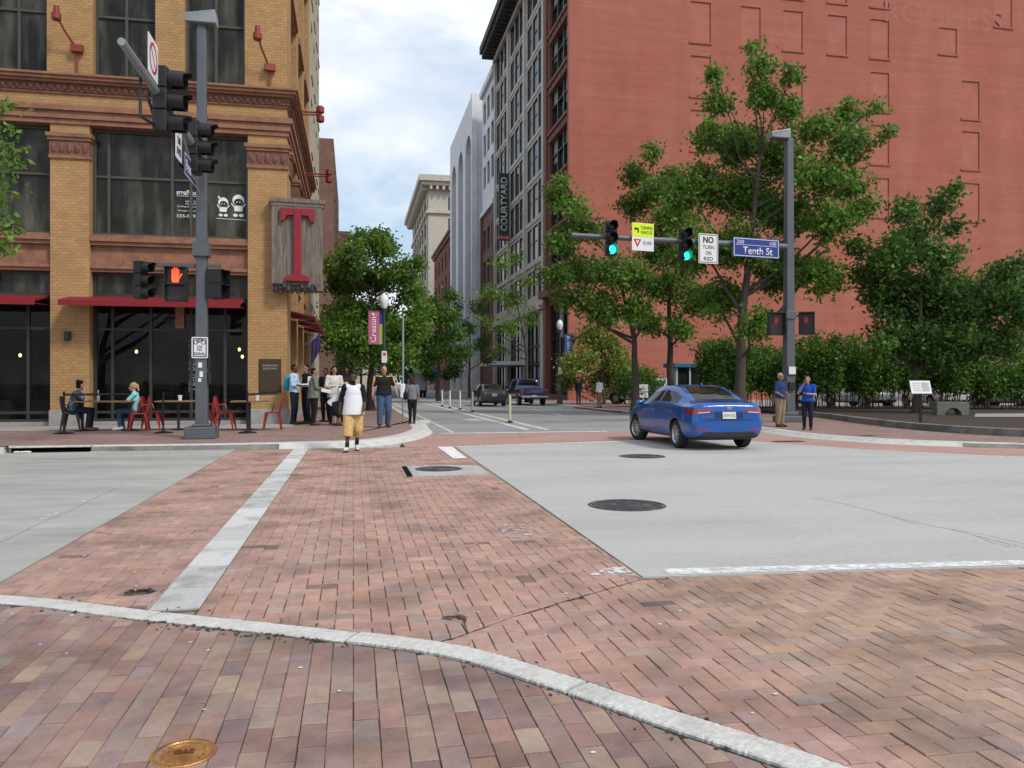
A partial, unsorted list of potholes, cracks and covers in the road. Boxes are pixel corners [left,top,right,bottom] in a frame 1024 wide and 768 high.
manhole cover [588,499,666,511]
crack [443,582,632,641]
crack [812,497,1024,548]
manhole cover [402,465,490,477]
drain grate [10,445,92,453]
utility cover [149,738,217,768]
